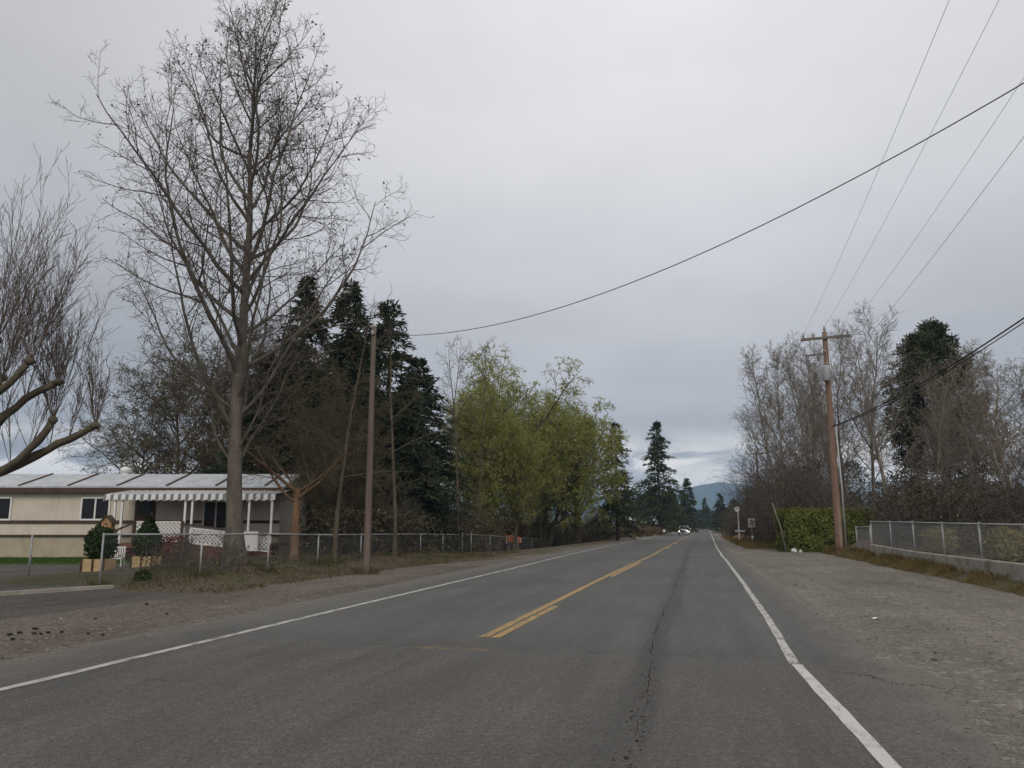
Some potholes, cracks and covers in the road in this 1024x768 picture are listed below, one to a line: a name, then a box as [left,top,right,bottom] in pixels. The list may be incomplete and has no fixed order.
crack [401,563,772,768]
crack [845,672,944,689]
